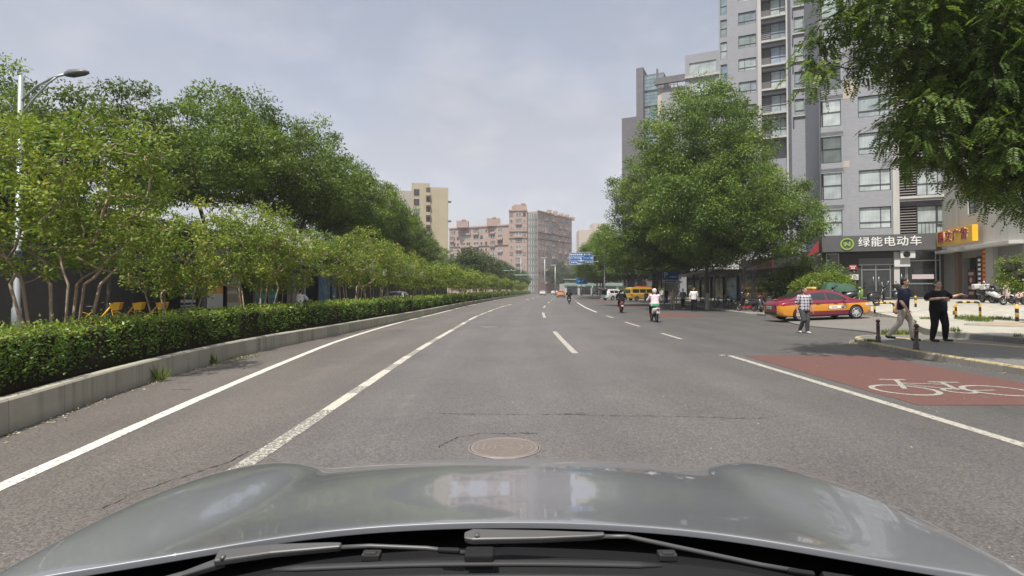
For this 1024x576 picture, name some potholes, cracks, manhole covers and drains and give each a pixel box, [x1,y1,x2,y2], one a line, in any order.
manhole cover [468,437,541,458]
crack [102,451,249,508]
